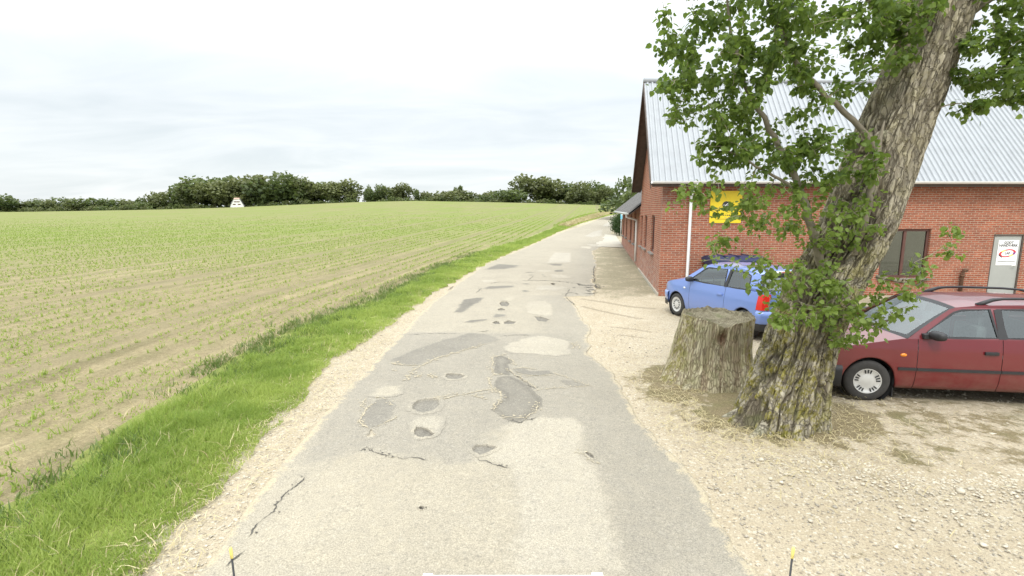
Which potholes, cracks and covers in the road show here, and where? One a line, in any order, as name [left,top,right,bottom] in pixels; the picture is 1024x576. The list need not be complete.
pothole [409,426,440,440]
pothole [440,372,468,381]
pothole [466,442,503,458]
pothole [405,396,446,415]
crack [362,446,424,460]
crack [226,476,305,568]
